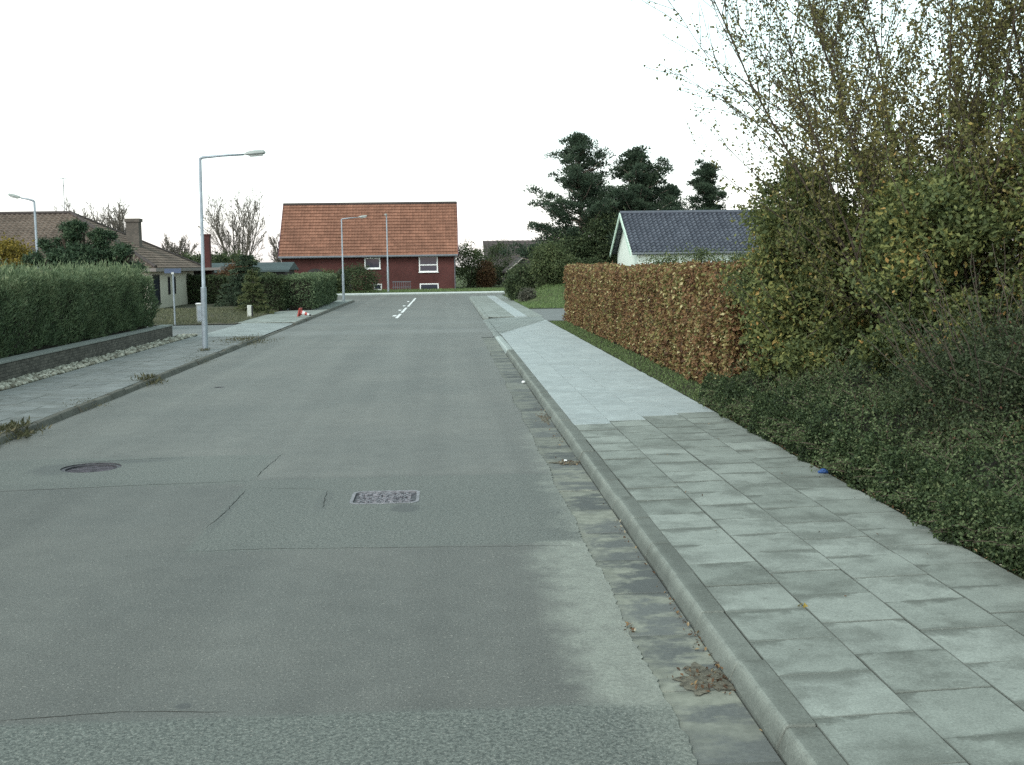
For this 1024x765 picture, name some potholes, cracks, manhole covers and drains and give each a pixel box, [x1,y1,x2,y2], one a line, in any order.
crack [0,456,279,527]
manhole cover [60,463,122,473]
